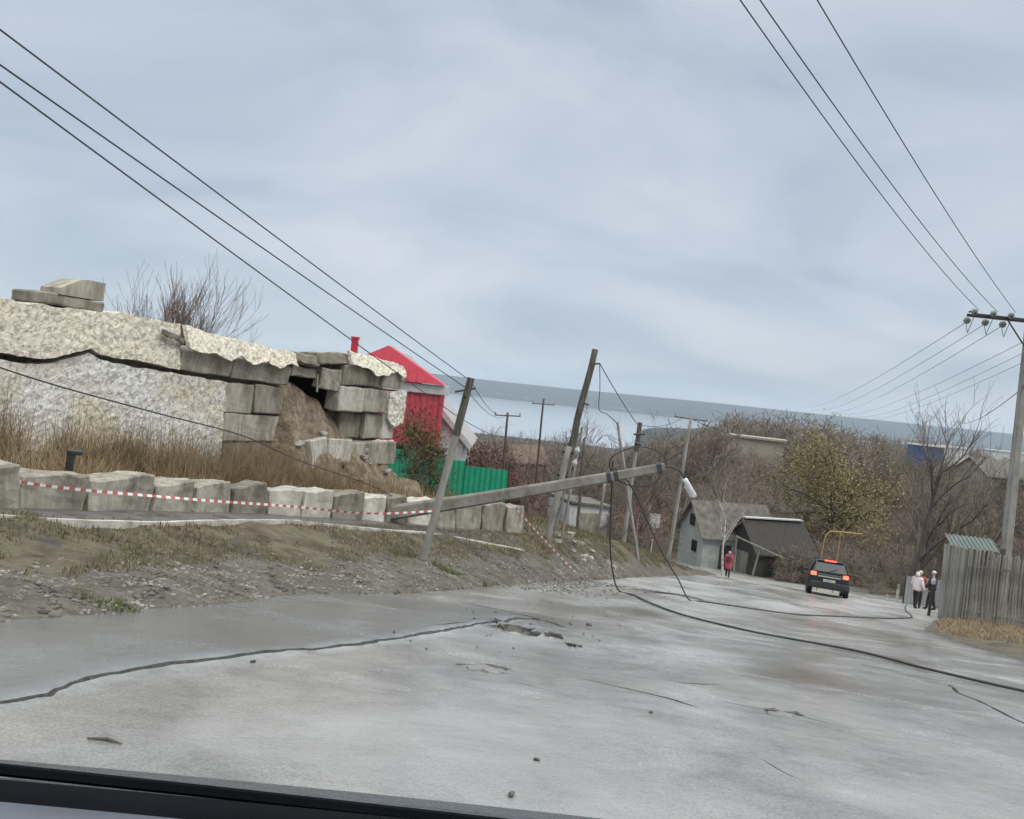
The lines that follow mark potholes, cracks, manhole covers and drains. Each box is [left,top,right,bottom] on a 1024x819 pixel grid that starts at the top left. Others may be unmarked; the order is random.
pothole [763,708,806,718]
pothole [484,622,546,637]
pothole [453,663,515,674]
crack [571,676,831,725]
crack [0,602,568,704]
crack [948,685,1024,724]
pothole [541,631,564,640]
